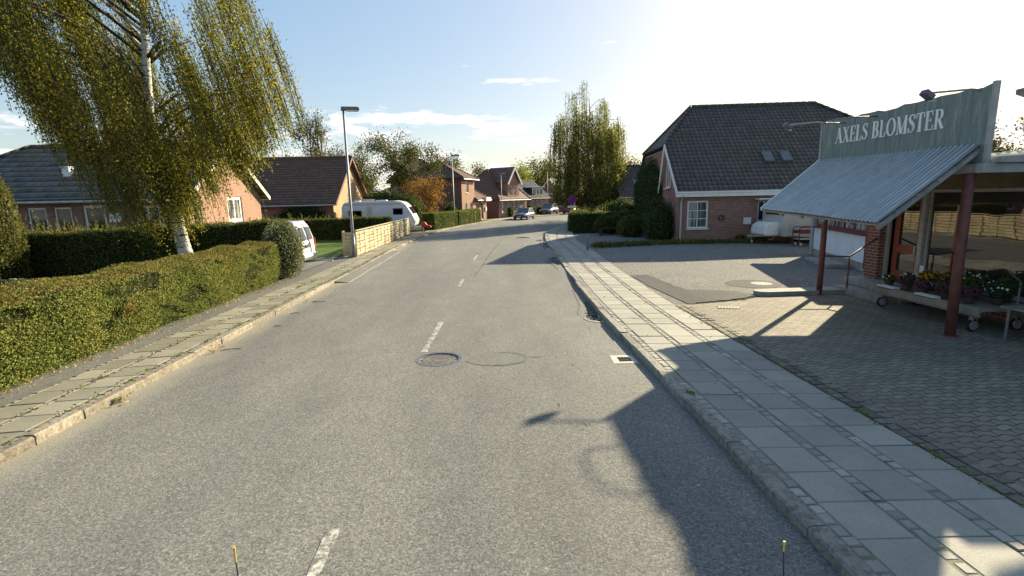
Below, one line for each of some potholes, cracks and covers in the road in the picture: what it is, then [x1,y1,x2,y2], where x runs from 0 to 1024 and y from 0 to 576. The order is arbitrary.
drain grate [609,355,638,364]
manhole cover [725,280,782,288]
manhole cover [416,352,462,367]
